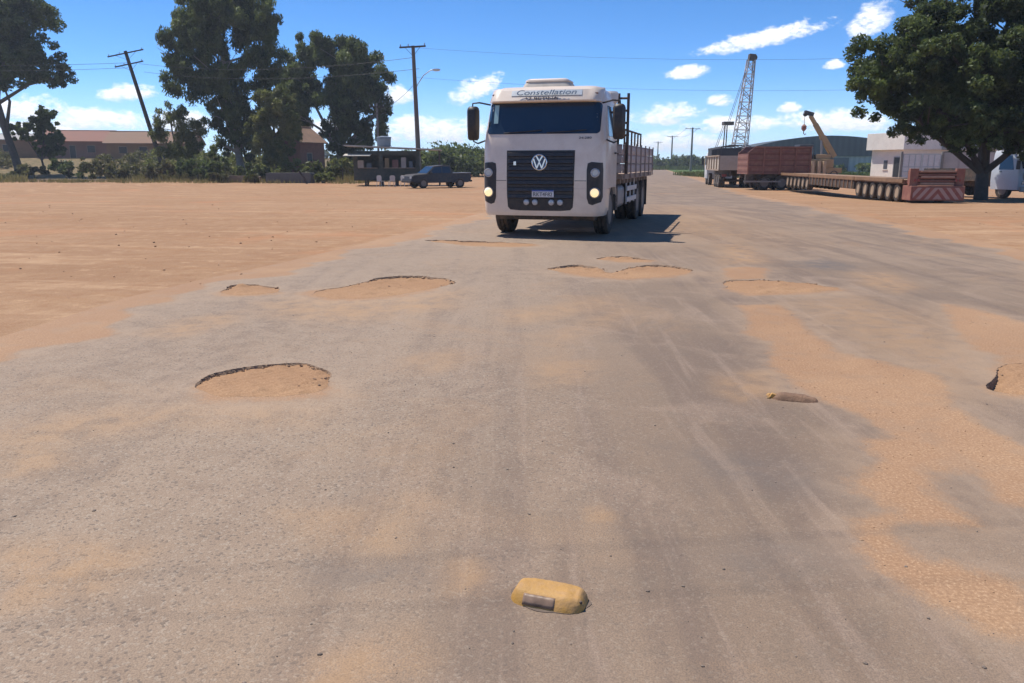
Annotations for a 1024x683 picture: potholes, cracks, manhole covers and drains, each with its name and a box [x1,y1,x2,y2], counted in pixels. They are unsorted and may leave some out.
pothole [312,276,456,299]
pothole [548,265,693,279]
pothole [220,284,280,295]
pothole [194,363,332,397]
pothole [986,363,1024,395]
pothole [722,279,839,294]
